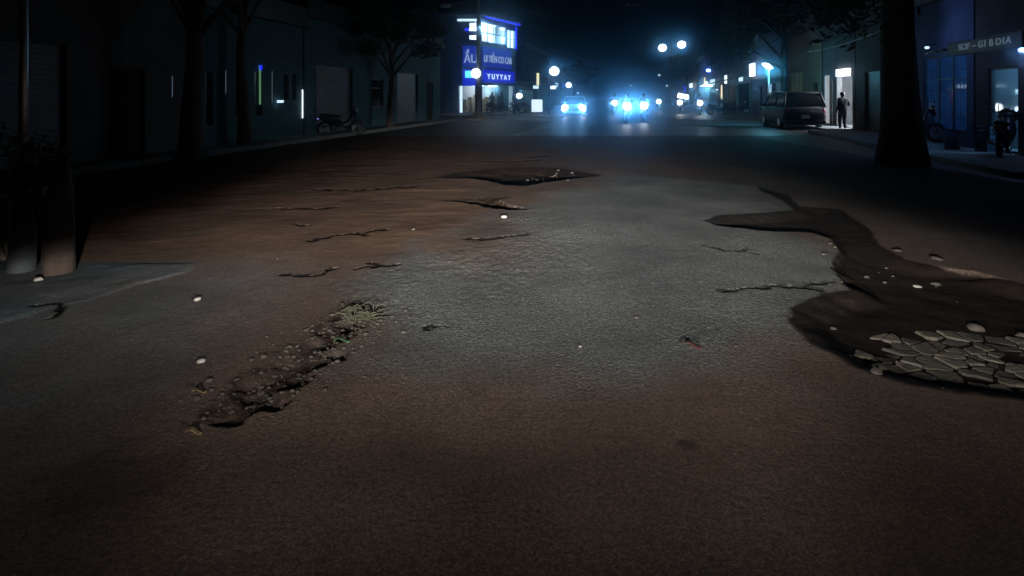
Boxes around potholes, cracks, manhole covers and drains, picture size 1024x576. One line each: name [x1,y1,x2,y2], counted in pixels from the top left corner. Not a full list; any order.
crack [20,301,71,320]
crack [270,185,421,243]
crack [697,243,762,255]
pothole [437,196,534,211]
pothole [781,271,1024,403]
pothole [431,166,602,186]
crack [460,232,532,243]
pothole [700,185,973,284]
crack [274,260,404,278]
crack [711,278,840,293]
pothole [195,303,380,432]
